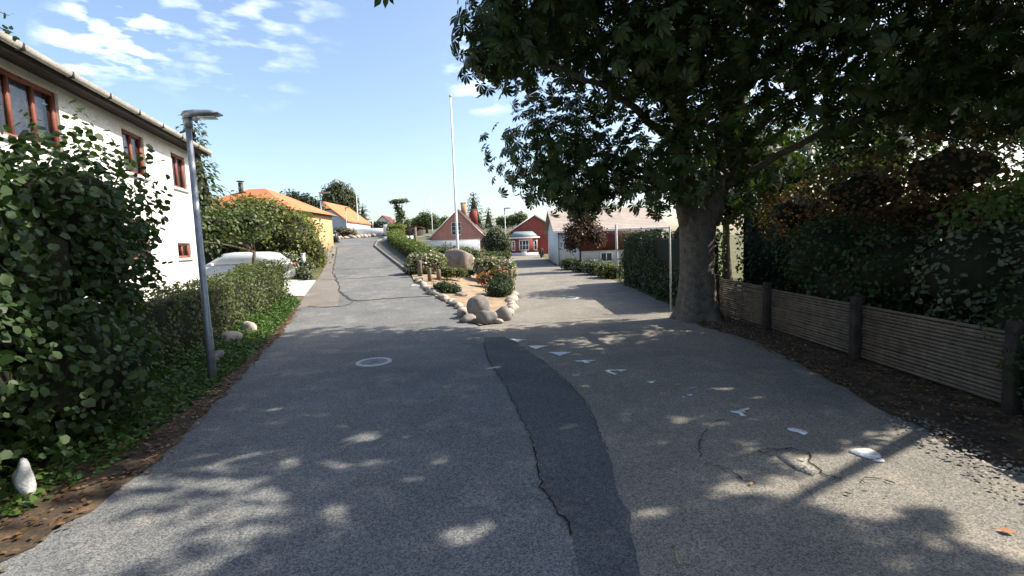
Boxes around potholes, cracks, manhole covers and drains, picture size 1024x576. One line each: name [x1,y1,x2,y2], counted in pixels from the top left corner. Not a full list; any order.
crack [533,446,572,536]
crack [309,265,428,307]
crack [752,447,839,499]
manhole cover [356,357,392,367]
crack [698,418,757,483]
